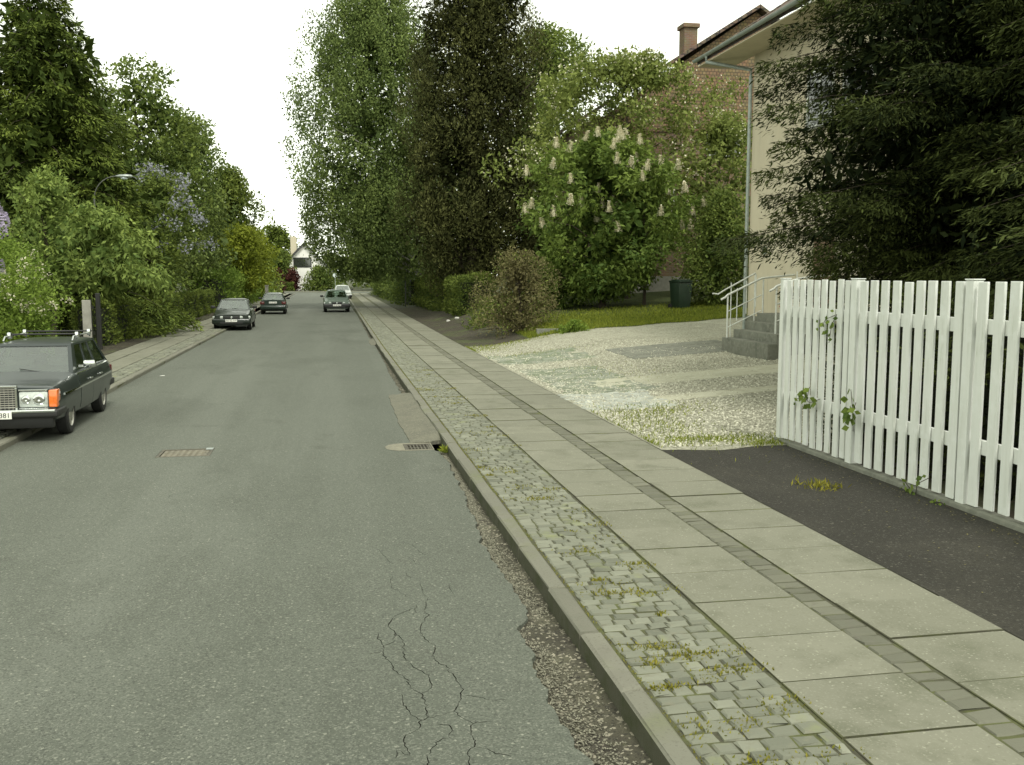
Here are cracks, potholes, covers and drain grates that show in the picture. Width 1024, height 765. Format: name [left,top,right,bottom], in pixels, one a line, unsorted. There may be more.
drain grate [385,443,434,451]
crack [370,598,509,765]
